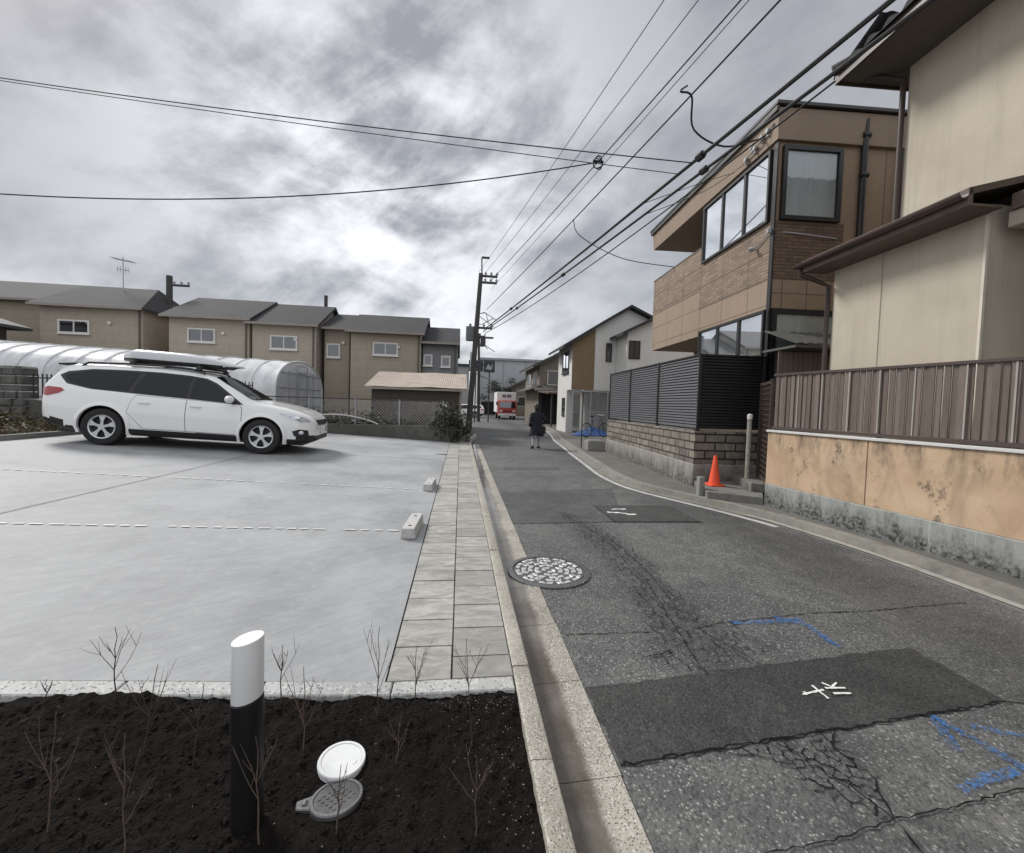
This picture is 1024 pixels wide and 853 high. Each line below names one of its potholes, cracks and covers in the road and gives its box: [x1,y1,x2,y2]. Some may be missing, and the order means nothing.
utility cover [295,778,363,822]
crack [716,730,923,853]
crack [557,511,965,674]
manhole cover [507,555,591,589]
